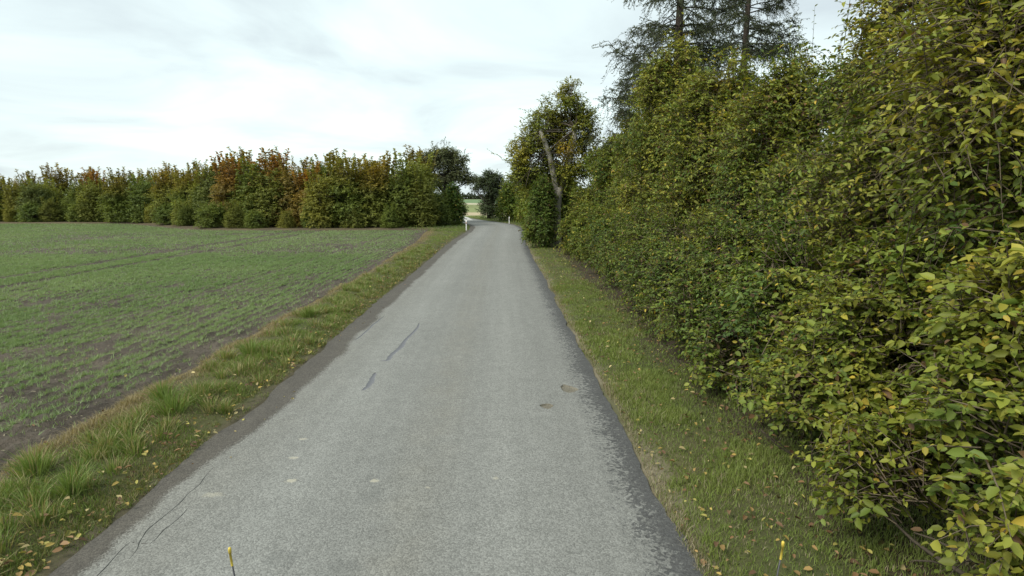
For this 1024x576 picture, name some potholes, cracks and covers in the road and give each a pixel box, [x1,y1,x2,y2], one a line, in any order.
crack [97,469,212,576]
